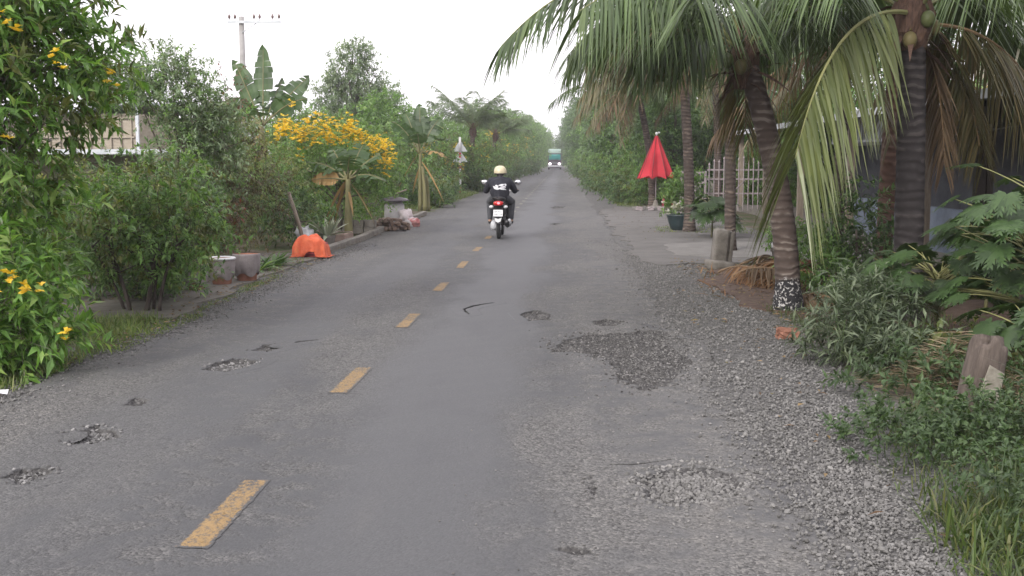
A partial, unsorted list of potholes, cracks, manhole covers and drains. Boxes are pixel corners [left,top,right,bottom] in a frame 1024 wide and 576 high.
pothole [0,460,84,494]
pothole [185,356,279,375]
crack [586,453,697,473]
pothole [34,420,145,450]
pothole [507,309,566,323]
pothole [610,458,775,517]
pothole [580,317,638,329]
crack [451,301,506,316]
